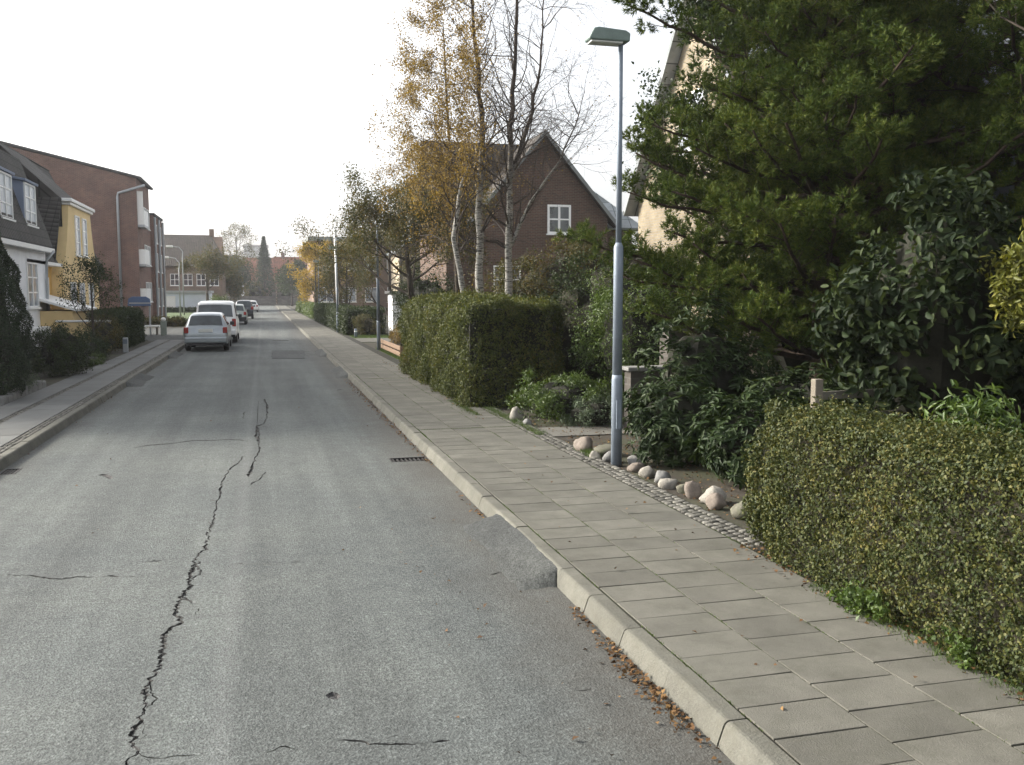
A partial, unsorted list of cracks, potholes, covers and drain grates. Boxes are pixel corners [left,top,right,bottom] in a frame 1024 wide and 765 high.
crack [338,735,448,745]
crack [9,399,289,765]
